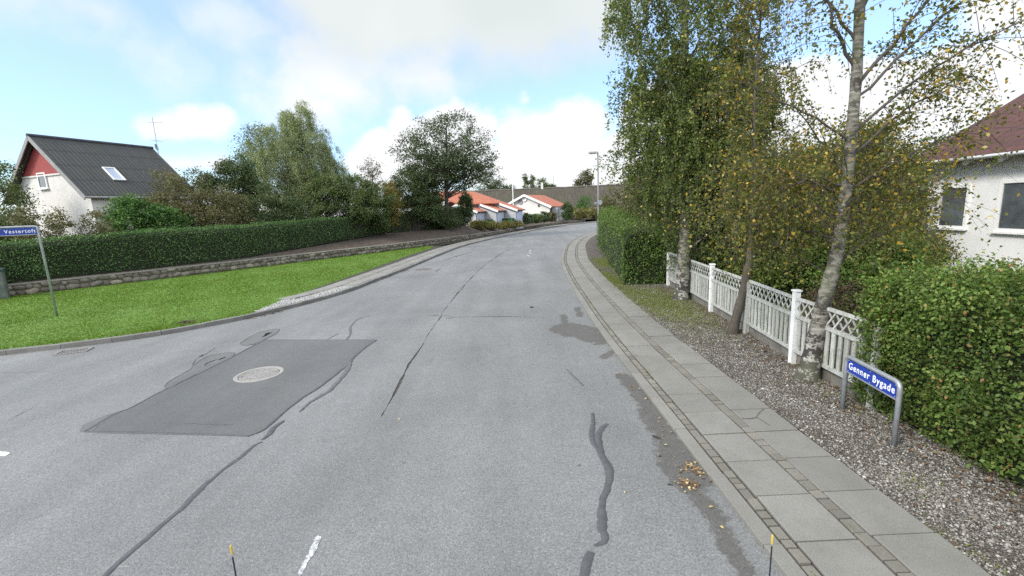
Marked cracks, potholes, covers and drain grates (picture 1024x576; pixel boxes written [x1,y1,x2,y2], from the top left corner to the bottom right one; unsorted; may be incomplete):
drain grate [52,347,94,356]
manhole cover [233,366,284,383]
